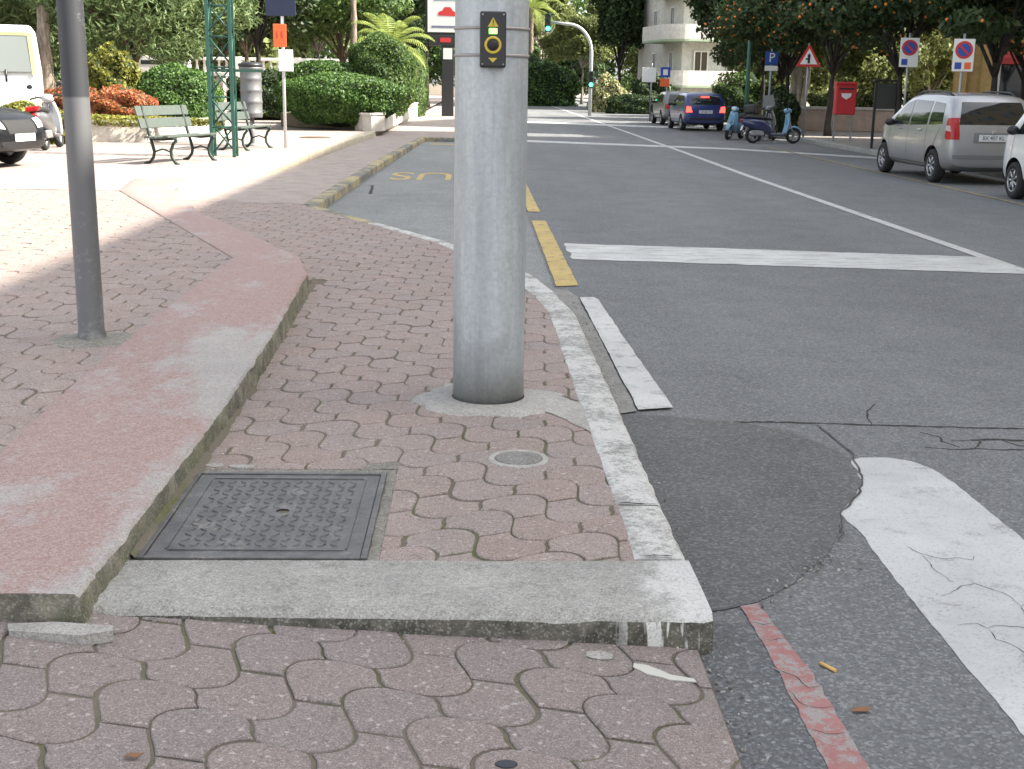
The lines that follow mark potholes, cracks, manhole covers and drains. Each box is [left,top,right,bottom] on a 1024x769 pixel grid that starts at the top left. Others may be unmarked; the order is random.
crack [733,404,1024,541]
manhole cover [135,471,387,560]
crack [905,545,1024,653]
manhole cover [488,449,549,469]
